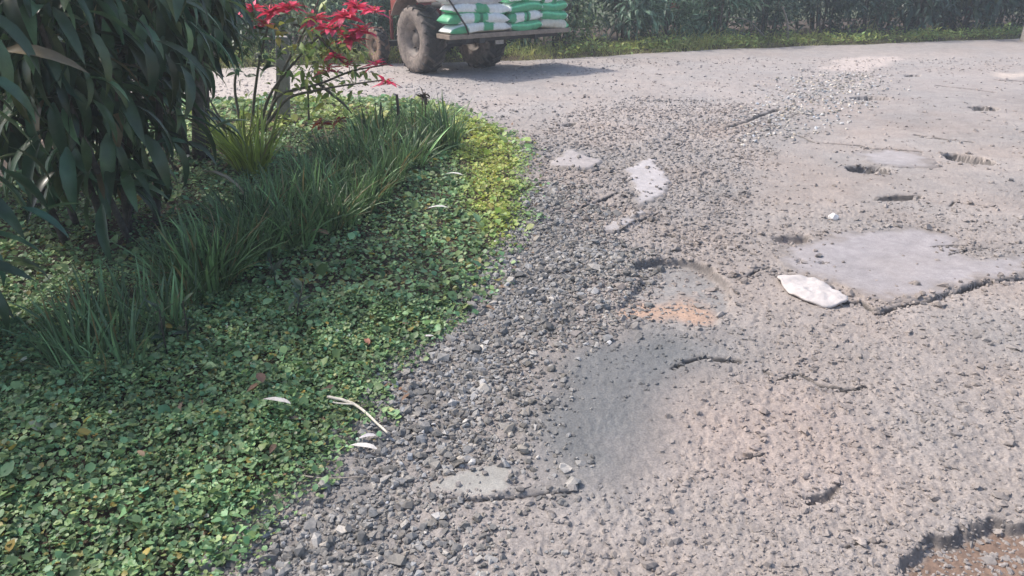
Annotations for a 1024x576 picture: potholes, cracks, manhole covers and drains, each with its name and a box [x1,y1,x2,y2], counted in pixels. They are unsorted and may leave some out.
pothole [582,256,734,332]
pothole [844,165,892,175]
crack [724,109,975,153]
pothole [894,515,1024,576]
pothole [770,234,811,244]
pothole [941,154,996,166]
pothole [879,194,924,202]
crack [670,356,744,371]
crack [761,368,869,394]
